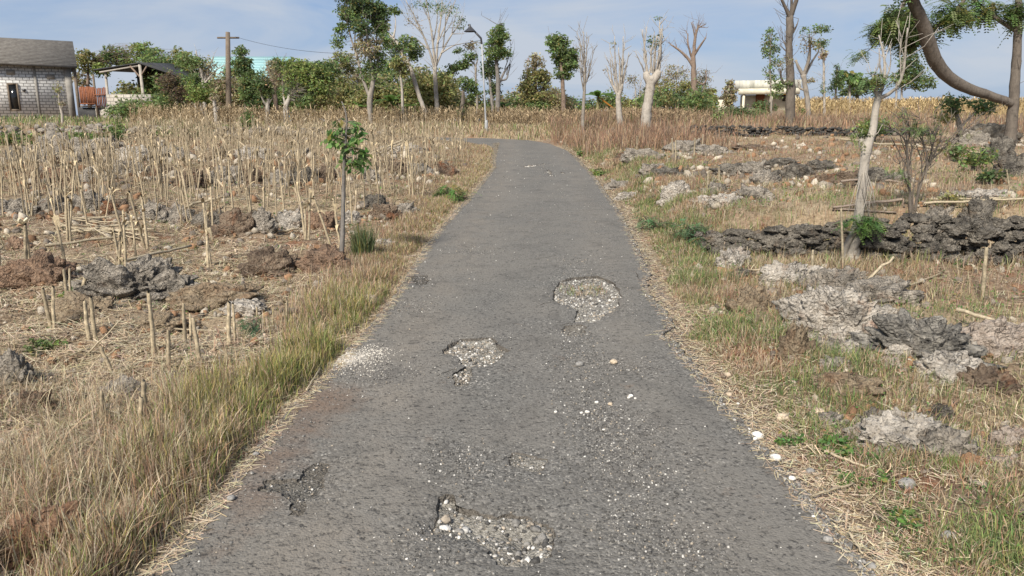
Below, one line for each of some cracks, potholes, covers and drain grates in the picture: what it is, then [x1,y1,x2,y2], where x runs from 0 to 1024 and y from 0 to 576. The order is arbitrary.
pothole [552,276,622,323]
pothole [411,275,430,285]
pothole [442,337,510,387]
pothole [257,462,331,517]
pothole [432,494,556,567]
pothole [508,452,548,472]
